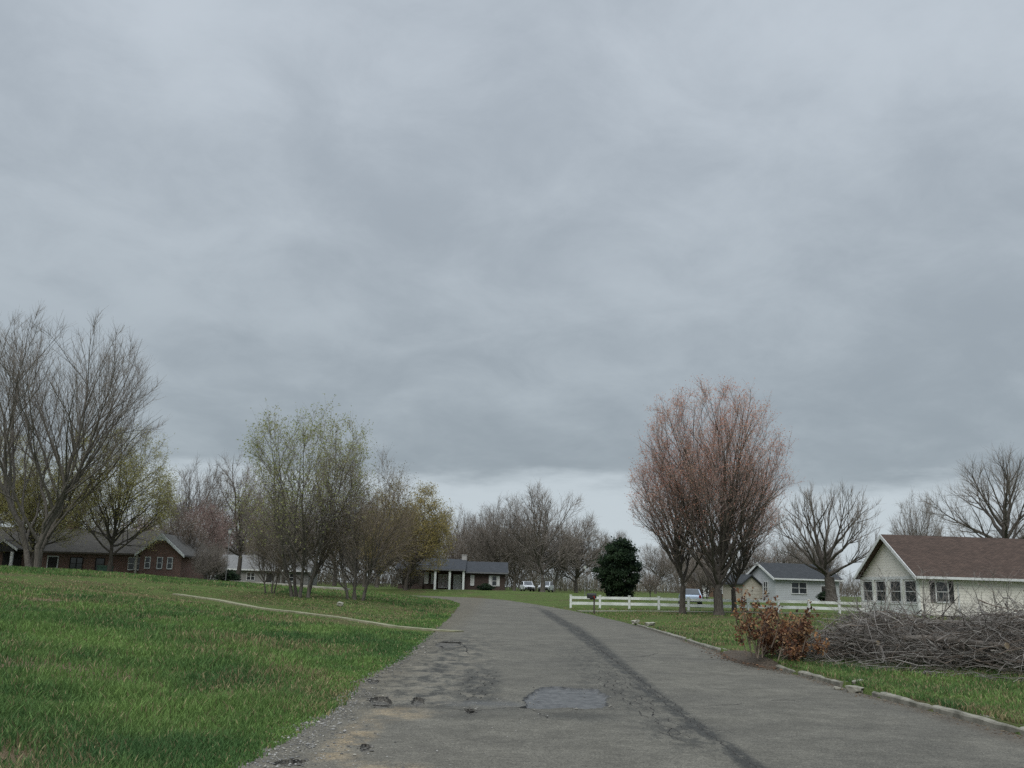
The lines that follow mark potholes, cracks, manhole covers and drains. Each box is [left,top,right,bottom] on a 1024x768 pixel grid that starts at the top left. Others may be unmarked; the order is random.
pothole [368,696,393,708]
pothole [435,639,463,649]
crack [366,613,757,768]
pothole [410,697,426,707]
